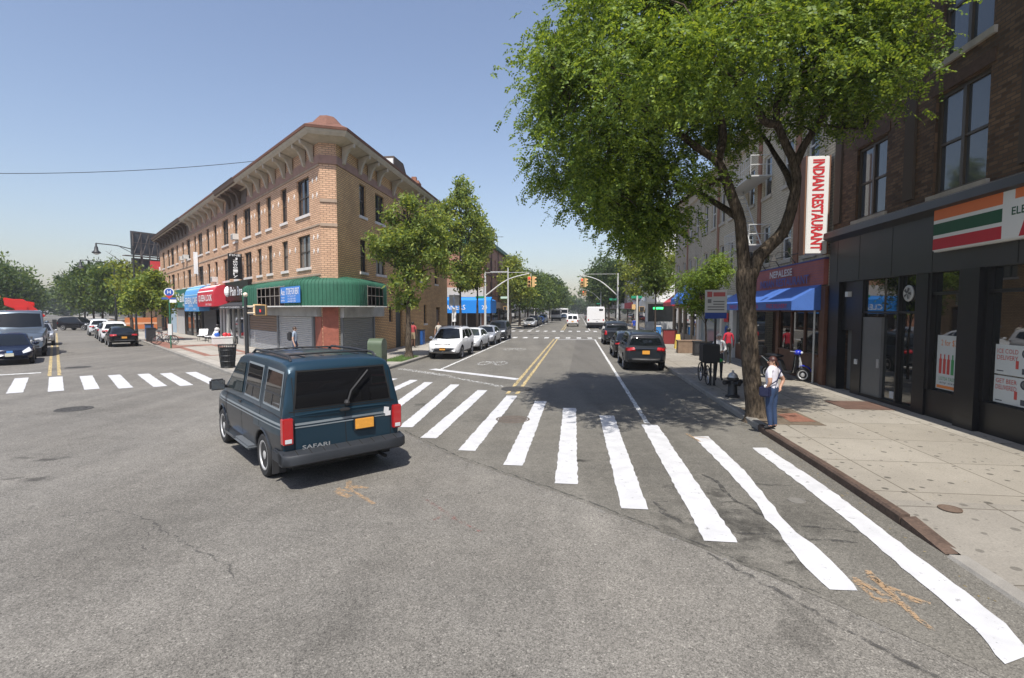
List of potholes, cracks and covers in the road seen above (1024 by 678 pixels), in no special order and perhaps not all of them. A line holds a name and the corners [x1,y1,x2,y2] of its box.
manhole cover [937,504,963,513]
manhole cover [496,415,530,423]
